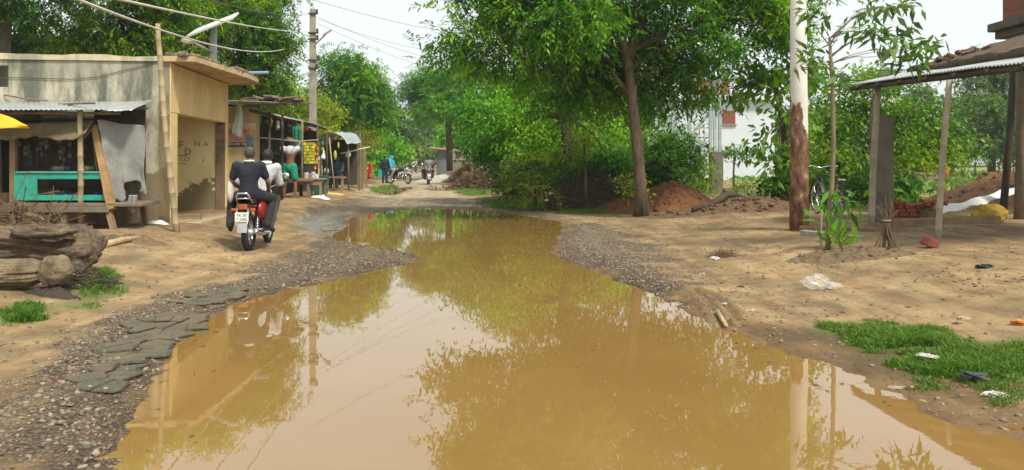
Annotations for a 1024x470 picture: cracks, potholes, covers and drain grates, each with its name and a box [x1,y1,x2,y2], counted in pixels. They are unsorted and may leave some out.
pothole [96,207,1024,470]
